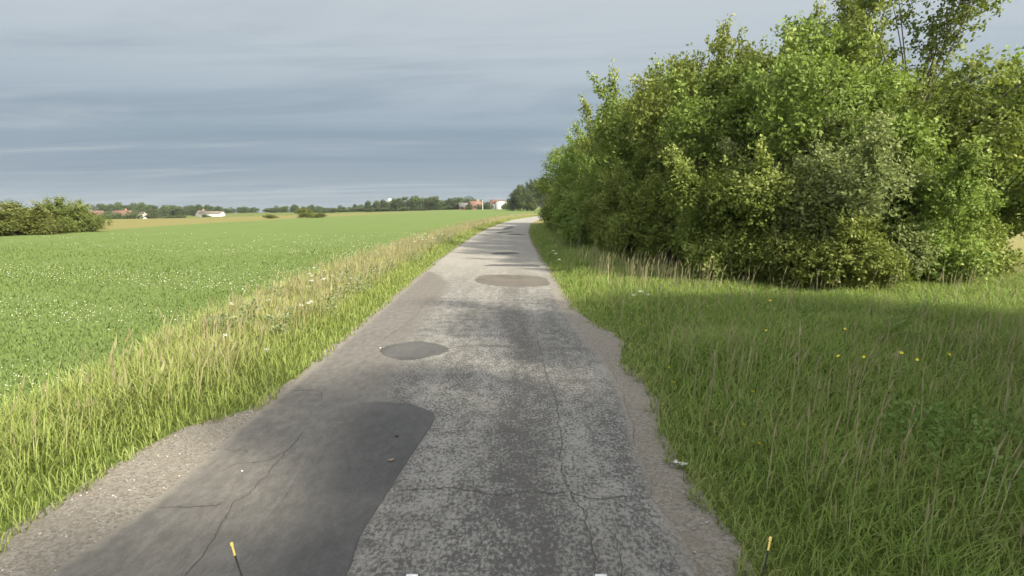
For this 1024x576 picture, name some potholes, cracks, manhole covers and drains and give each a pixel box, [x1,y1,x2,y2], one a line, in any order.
crack [155,428,306,576]
crack [401,306,647,576]
